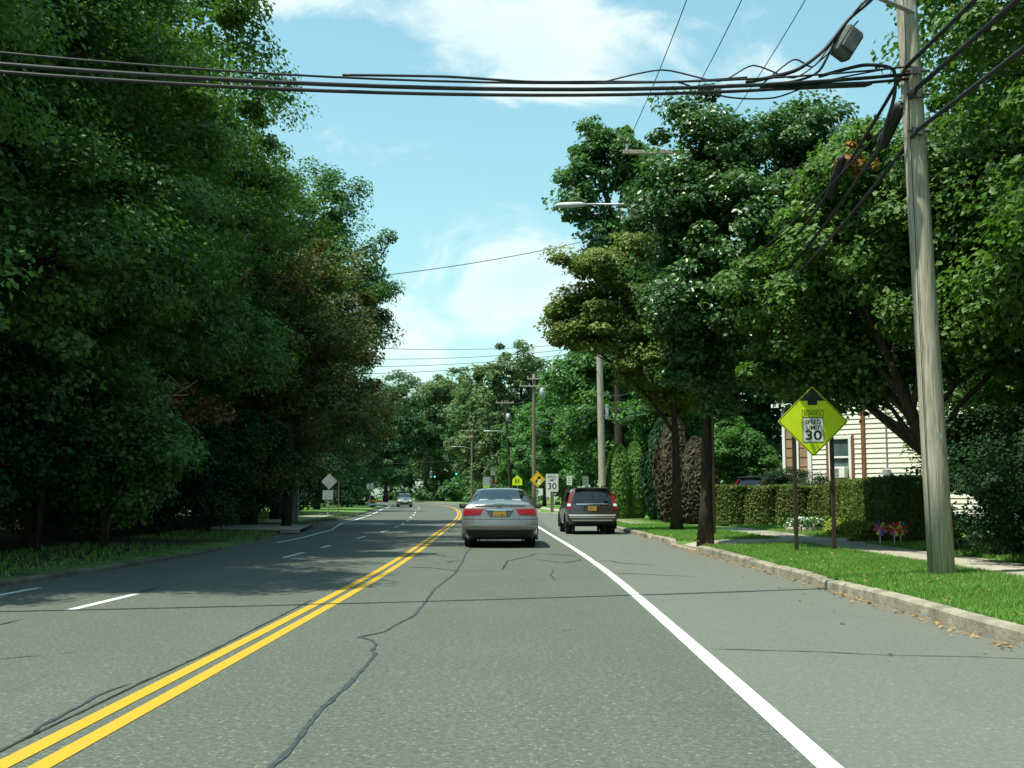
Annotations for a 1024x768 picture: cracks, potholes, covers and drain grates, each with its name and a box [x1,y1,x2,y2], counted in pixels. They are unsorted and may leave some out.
crack [0,600,311,752]
crack [422,553,674,580]
